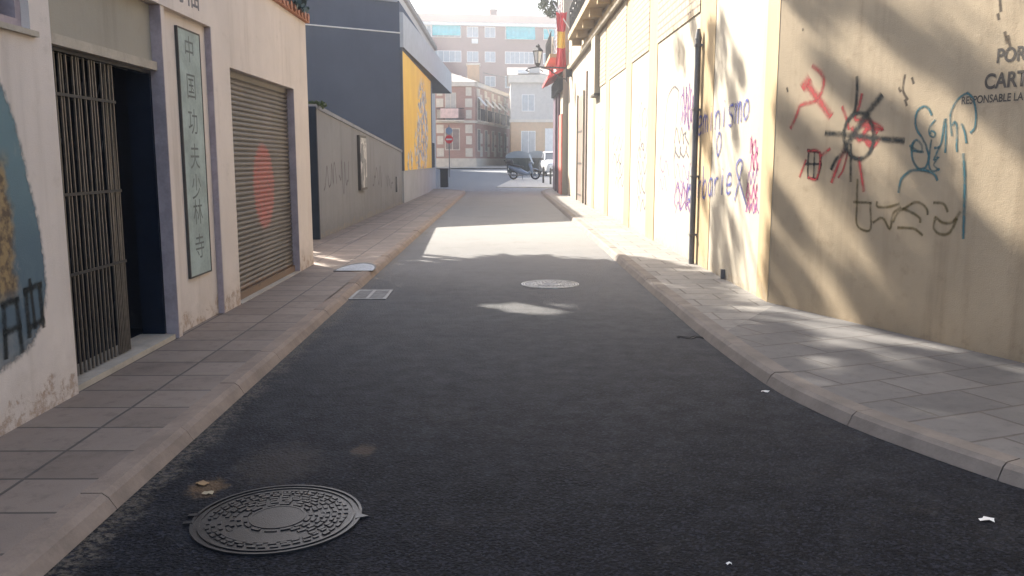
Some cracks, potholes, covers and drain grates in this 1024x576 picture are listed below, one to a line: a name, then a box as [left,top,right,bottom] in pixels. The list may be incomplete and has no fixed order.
utility cover [334,263,376,271]
drain grate [348,290,394,300]
manhole cover [521,280,579,289]
manhole cover [182,485,369,556]
